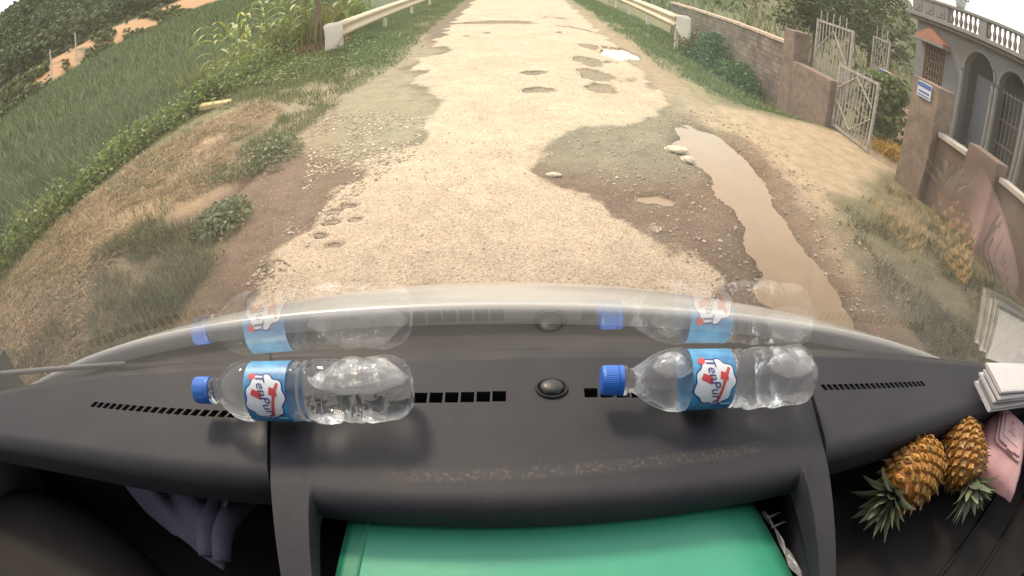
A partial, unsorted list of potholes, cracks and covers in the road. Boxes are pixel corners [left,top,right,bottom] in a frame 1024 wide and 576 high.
pothole [633,192,678,209]
pothole [597,45,643,62]
pothole [519,86,560,94]
pothole [576,43,603,51]
pothole [570,55,605,68]
pothole [580,81,620,95]
pothole [573,67,619,84]
